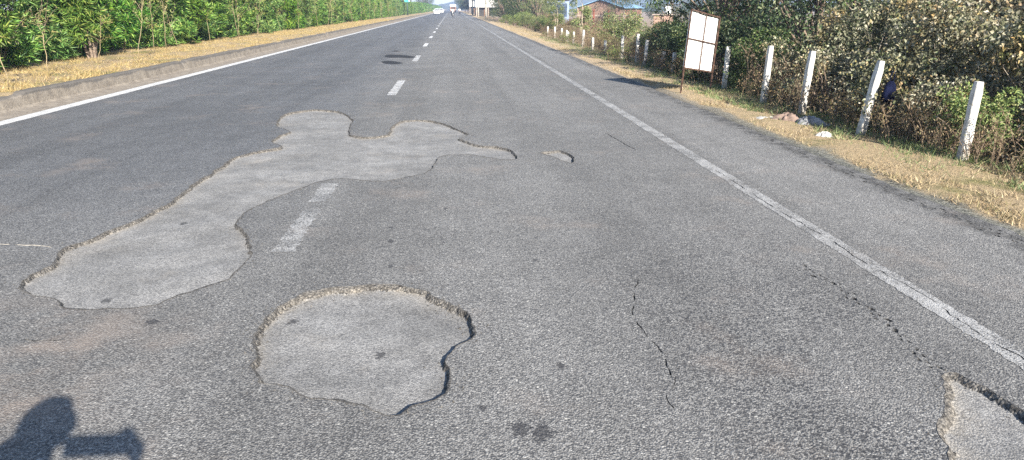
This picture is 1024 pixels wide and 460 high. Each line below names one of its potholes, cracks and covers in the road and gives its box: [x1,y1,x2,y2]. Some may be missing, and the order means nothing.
crack [631,278,676,408]
crack [719,172,1024,359]
